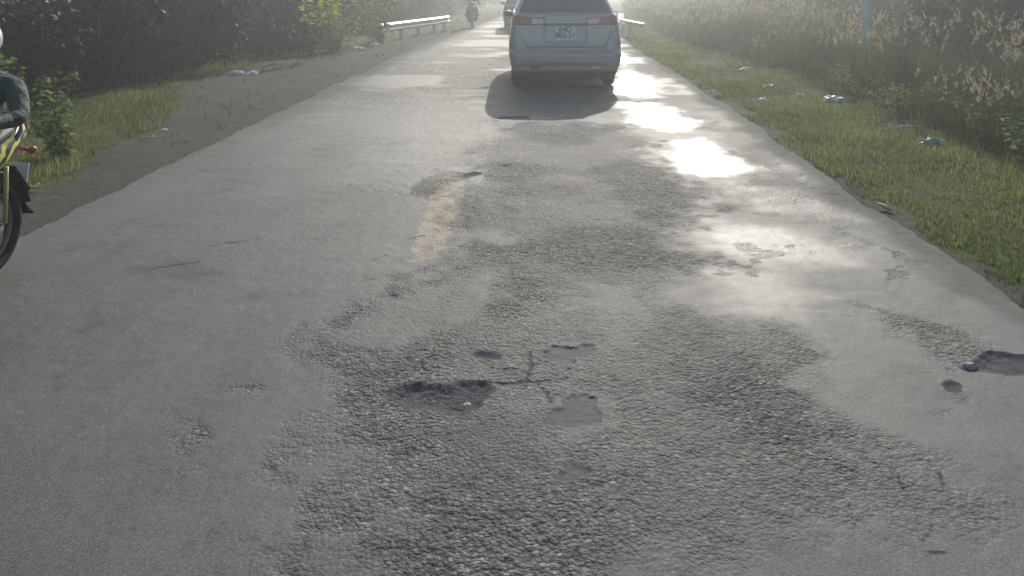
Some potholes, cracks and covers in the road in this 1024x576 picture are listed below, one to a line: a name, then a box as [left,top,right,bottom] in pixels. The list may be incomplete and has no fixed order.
pothole [552,458,596,484]
pothole [958,350,1024,376]
pothole [542,393,609,429]
pothole [387,378,498,417]
pothole [539,342,600,365]
pothole [940,379,965,393]
pothole [469,349,504,361]
crack [488,351,571,405]
